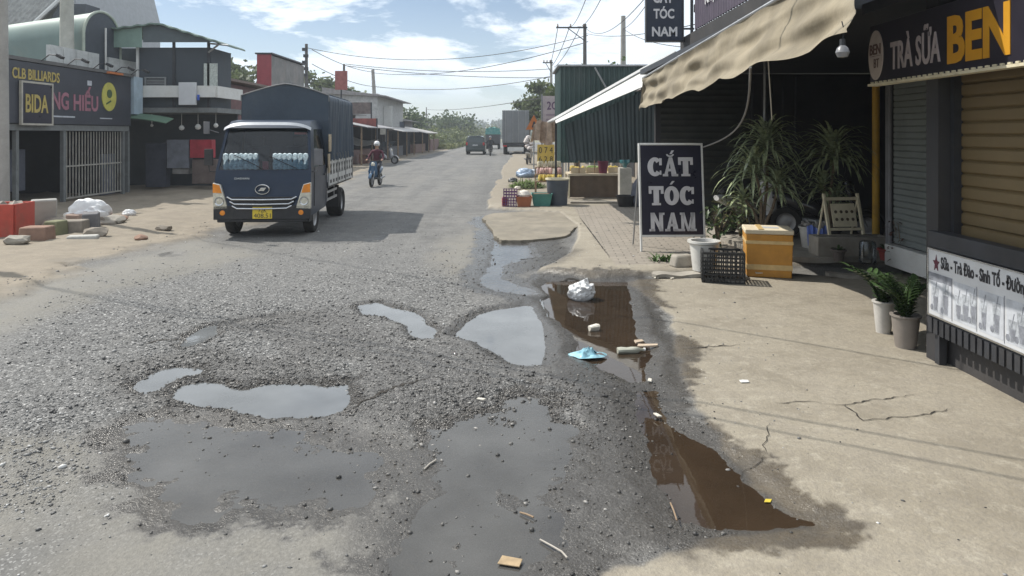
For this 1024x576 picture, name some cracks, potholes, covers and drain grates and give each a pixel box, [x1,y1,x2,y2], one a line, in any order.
crack [353,379,425,408]
pothole [445,296,563,369]
pothole [165,319,230,351]
pothole [304,371,632,576]
crack [786,395,947,420]
pothole [152,372,371,426]
pothole [347,298,448,341]
pothole [115,359,219,397]
pothole [529,270,675,385]
pothole [48,406,403,566]
